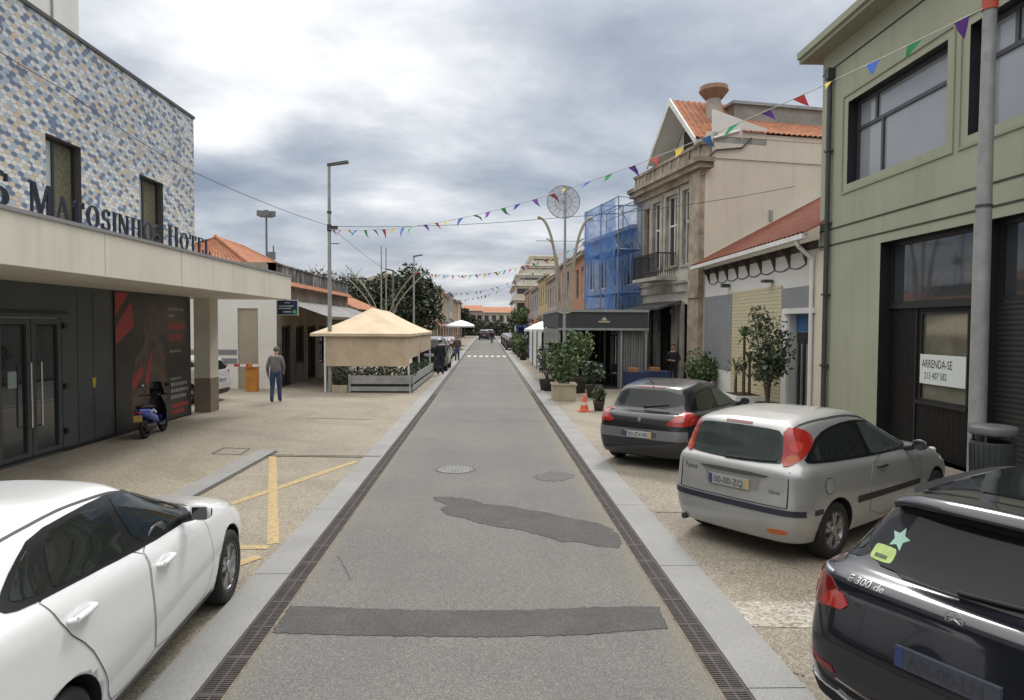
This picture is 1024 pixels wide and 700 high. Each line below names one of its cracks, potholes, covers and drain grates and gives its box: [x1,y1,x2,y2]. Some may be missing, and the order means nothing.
drain grate [192,338,477,700]
drain grate [495,338,755,700]
manhole cover [435,465,476,474]
